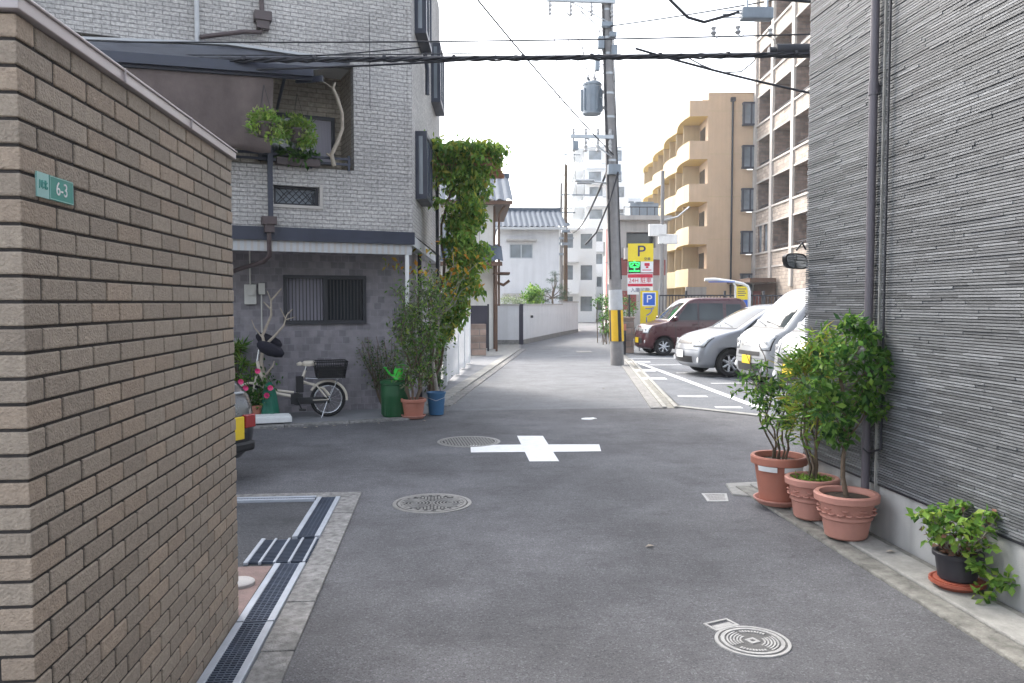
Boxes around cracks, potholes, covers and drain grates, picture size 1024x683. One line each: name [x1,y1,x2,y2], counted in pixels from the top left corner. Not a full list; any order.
manhole cover [702,493,729,502]
manhole cover [437,436,500,448]
drain grate [243,537,319,566]
drain grate [196,621,274,683]
drain grate [236,562,306,624]
drain grate [292,496,340,539]
manhole cover [392,493,472,514]
manhole cover [703,618,792,658]
